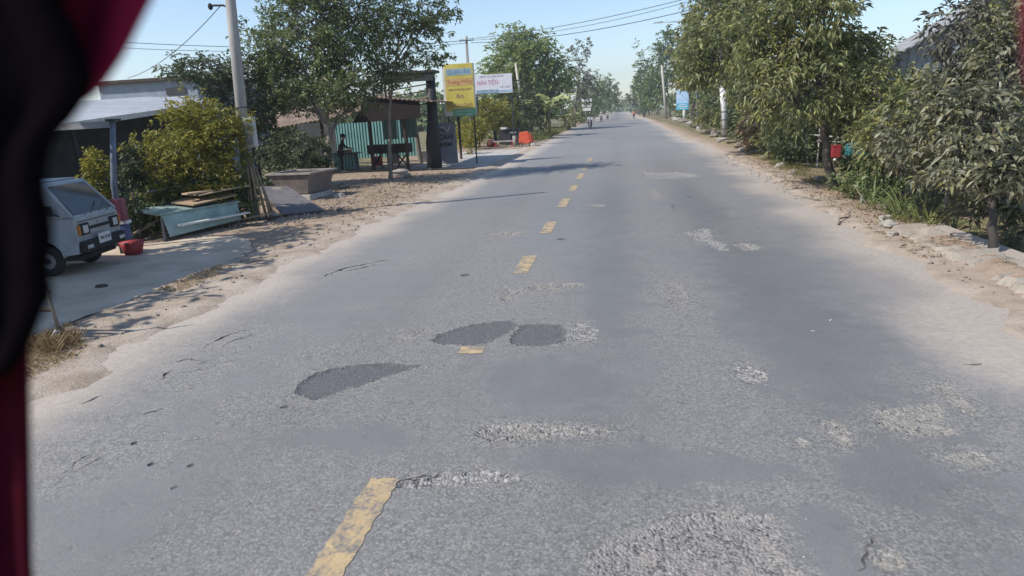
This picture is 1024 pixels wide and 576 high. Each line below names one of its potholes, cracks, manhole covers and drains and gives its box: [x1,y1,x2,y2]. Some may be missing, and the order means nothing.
pothole [587,509,805,576]
crack [323,259,388,277]
pothole [732,243,760,251]
pothole [394,469,524,490]
pothole [473,422,613,443]
pothole [681,228,729,251]
pothole [566,324,599,343]
pothole [868,404,960,439]
pothole [527,282,585,292]
pothole [939,451,995,467]
crack [857,520,875,572]
crack [162,328,256,390]
